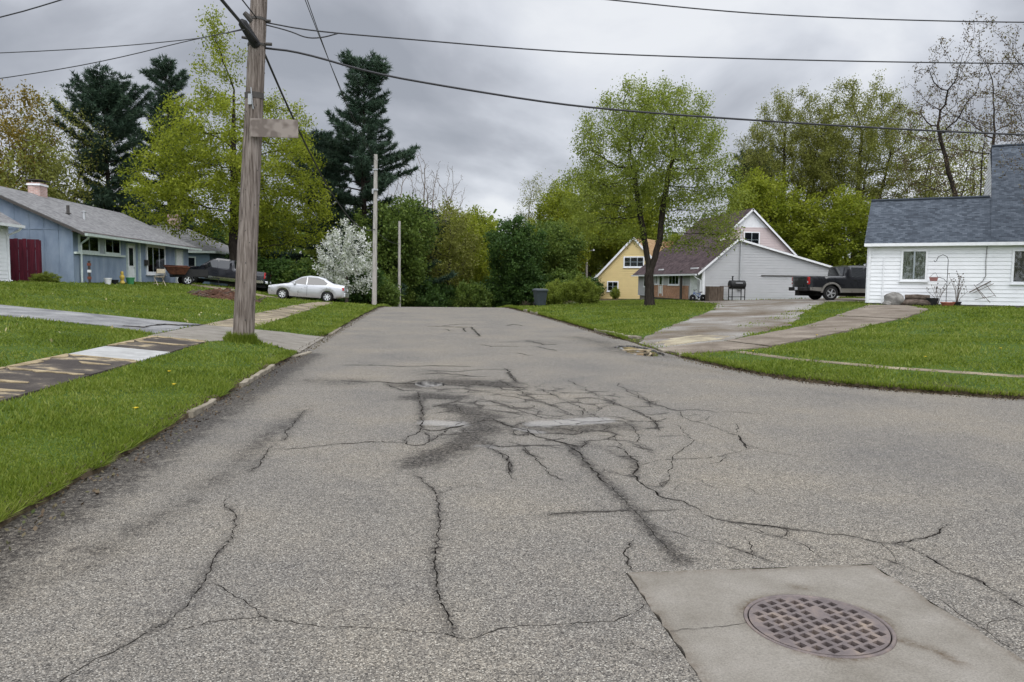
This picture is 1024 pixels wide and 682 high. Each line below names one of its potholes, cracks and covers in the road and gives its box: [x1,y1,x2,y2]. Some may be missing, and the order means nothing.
crack [351,324,1024,649]
crack [59,476,667,682]
manhole cover [743,594,897,659]
crack [253,412,384,469]
